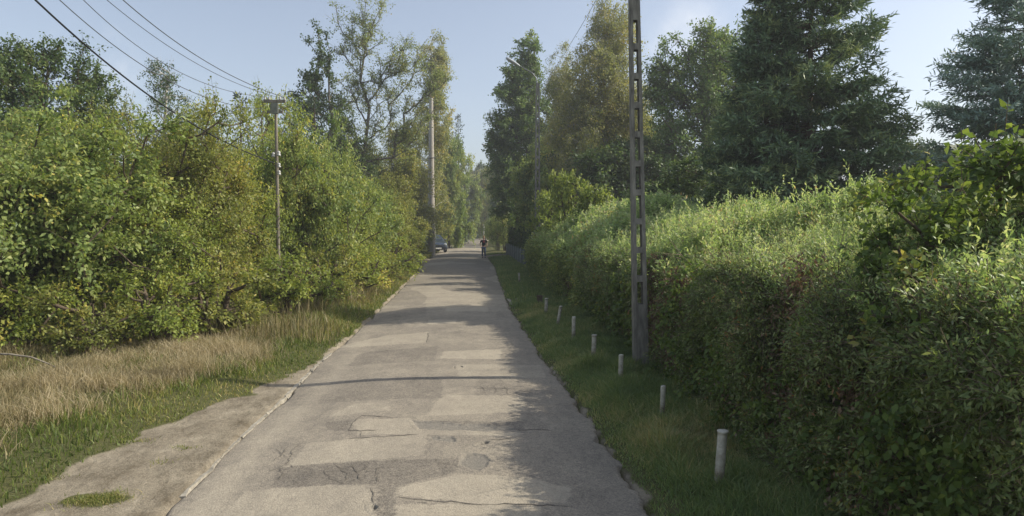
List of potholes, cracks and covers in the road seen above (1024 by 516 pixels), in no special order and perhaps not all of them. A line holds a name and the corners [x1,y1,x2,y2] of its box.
crack [398,496,563,506]
crack [348,415,412,438]
crack [270,443,378,505]
